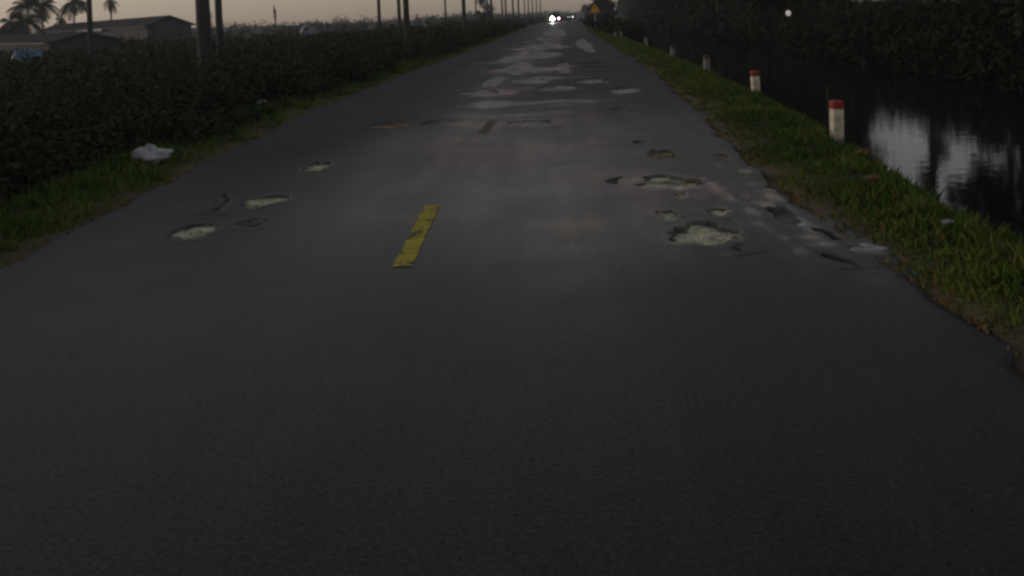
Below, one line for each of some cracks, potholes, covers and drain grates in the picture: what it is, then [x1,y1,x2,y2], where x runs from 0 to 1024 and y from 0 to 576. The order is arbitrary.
pothole [360,121,425,129]
pothole [649,217,758,250]
pothole [639,208,693,224]
pothole [635,148,691,161]
pothole [618,172,721,192]
pothole [220,193,305,212]
pothole [290,159,342,173]
pothole [149,221,238,244]
pothole [751,204,817,229]
pothole [690,205,746,220]
pothole [216,216,285,232]
